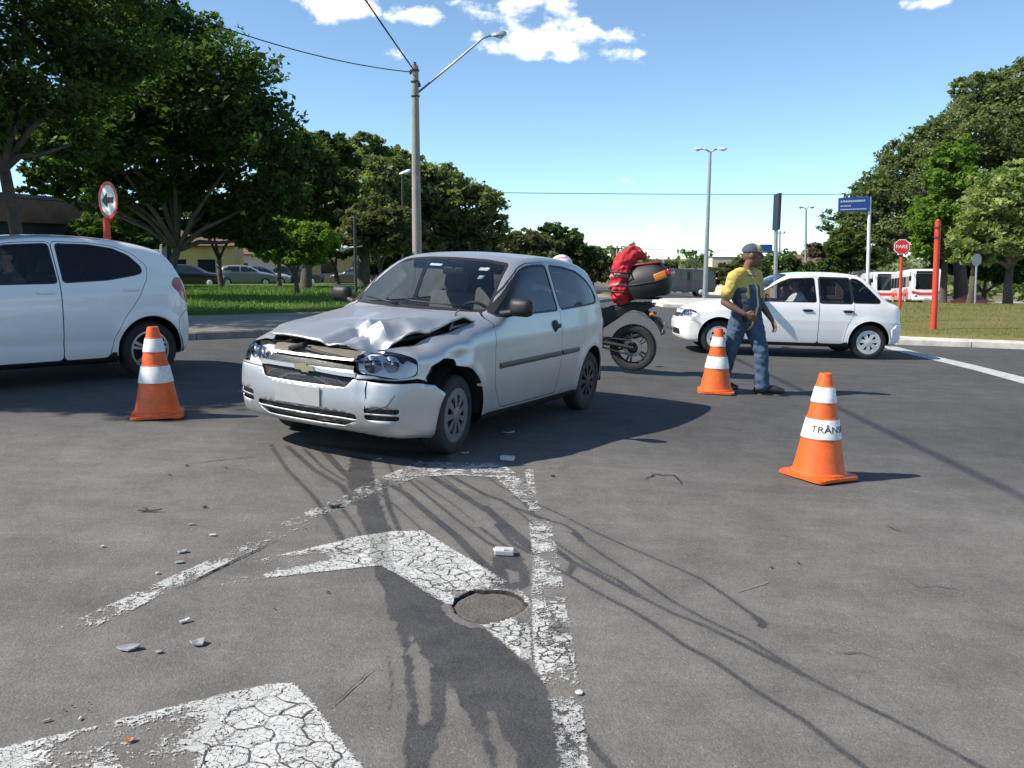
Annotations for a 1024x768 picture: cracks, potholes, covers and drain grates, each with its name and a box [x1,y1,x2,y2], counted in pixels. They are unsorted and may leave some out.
manhole cover [440,587,538,629]
